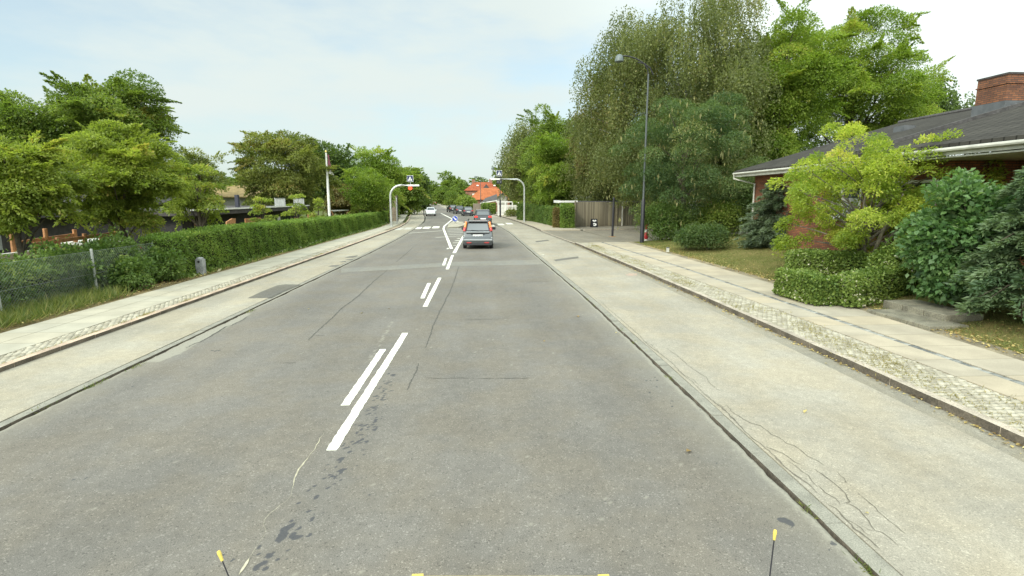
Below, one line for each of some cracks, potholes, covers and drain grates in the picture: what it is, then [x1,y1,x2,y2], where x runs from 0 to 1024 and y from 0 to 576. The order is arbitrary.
crack [239,433,324,574]
crack [407,270,458,390]
crack [309,246,414,339]
